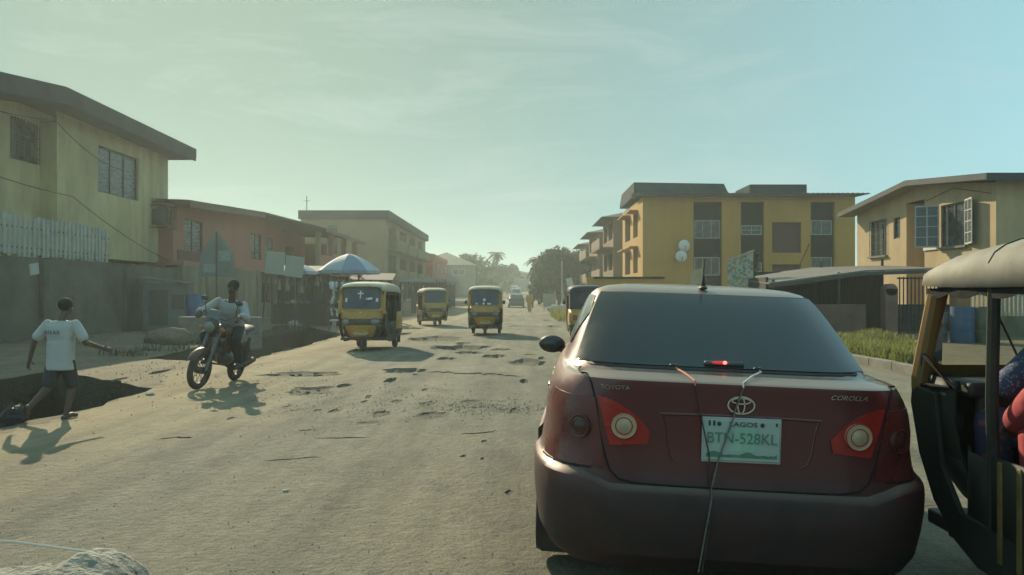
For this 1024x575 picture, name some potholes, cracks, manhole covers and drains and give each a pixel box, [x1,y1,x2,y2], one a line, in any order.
pothole [508,358,547,366]
pothole [285,386,336,396]
